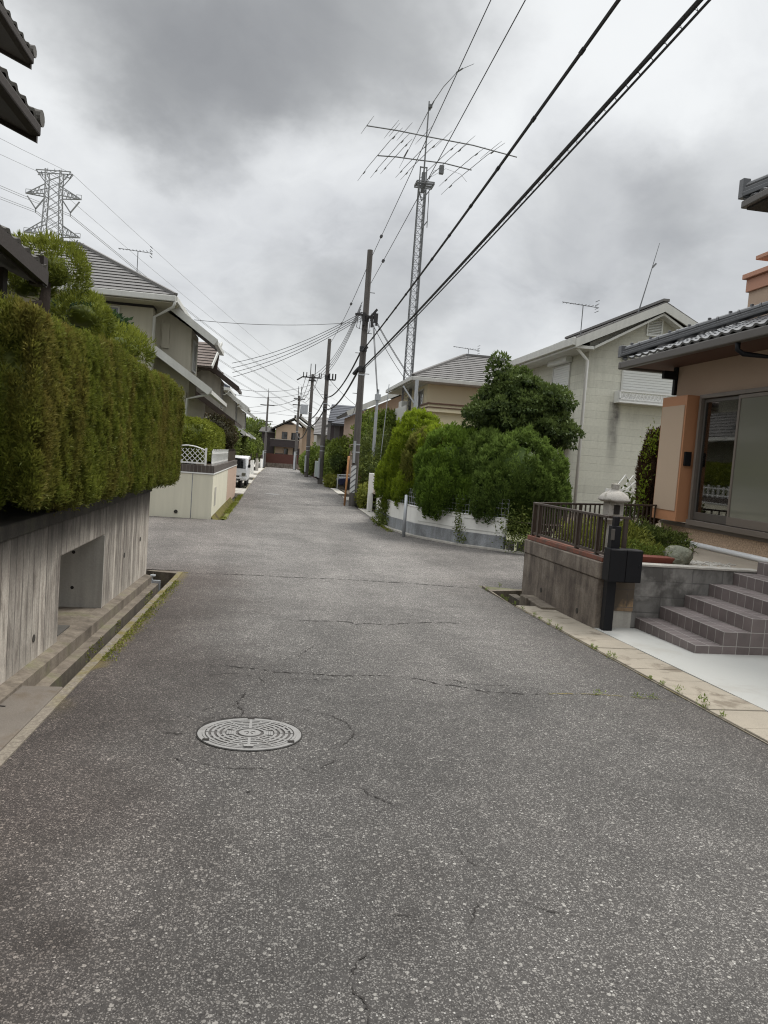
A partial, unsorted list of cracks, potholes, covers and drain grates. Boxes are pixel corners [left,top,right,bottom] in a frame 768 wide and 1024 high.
crack [297,707,354,773]
crack [165,692,246,734]
manhole cover [196,717,303,751]
crack [313,938,371,1024]
crack [194,646,656,702]
